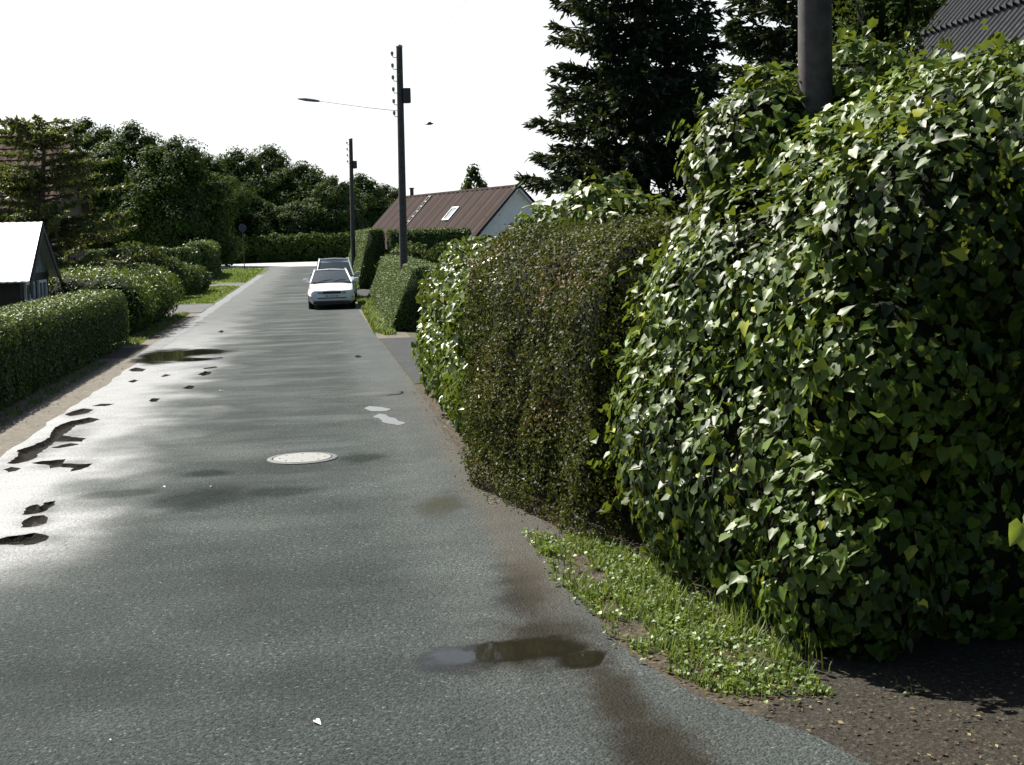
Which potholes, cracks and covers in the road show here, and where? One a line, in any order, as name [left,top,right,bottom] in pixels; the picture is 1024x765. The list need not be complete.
pothole [22,501,55,515]
pothole [65,408,93,416]
pothole [8,417,100,464]
manhole cover [267,452,338,465]
pothole [21,515,48,528]
pothole [0,533,49,546]
pothole [33,459,93,472]
